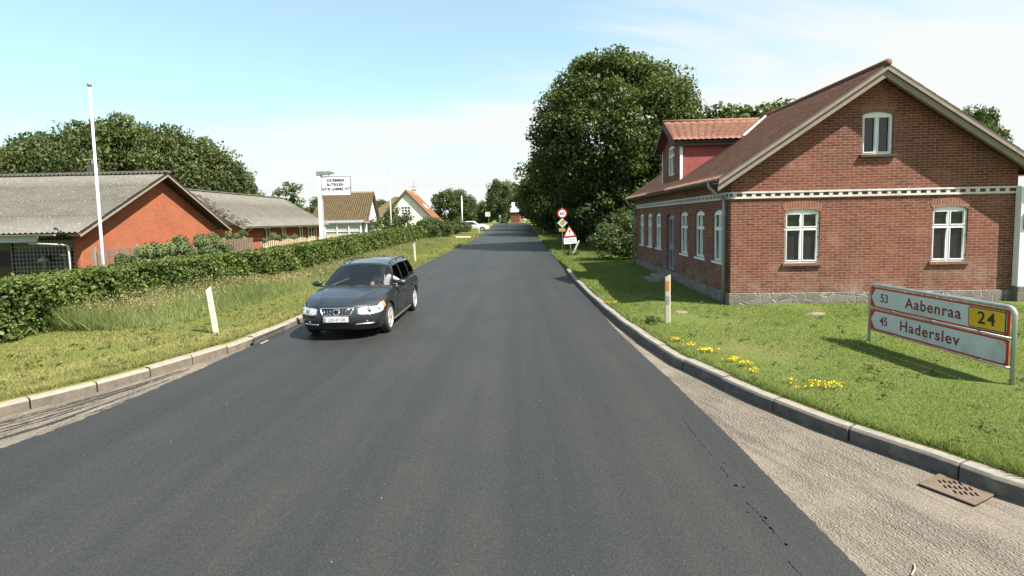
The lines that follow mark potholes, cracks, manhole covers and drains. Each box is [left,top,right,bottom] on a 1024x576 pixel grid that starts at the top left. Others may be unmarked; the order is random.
drain grate [918,473,996,507]
